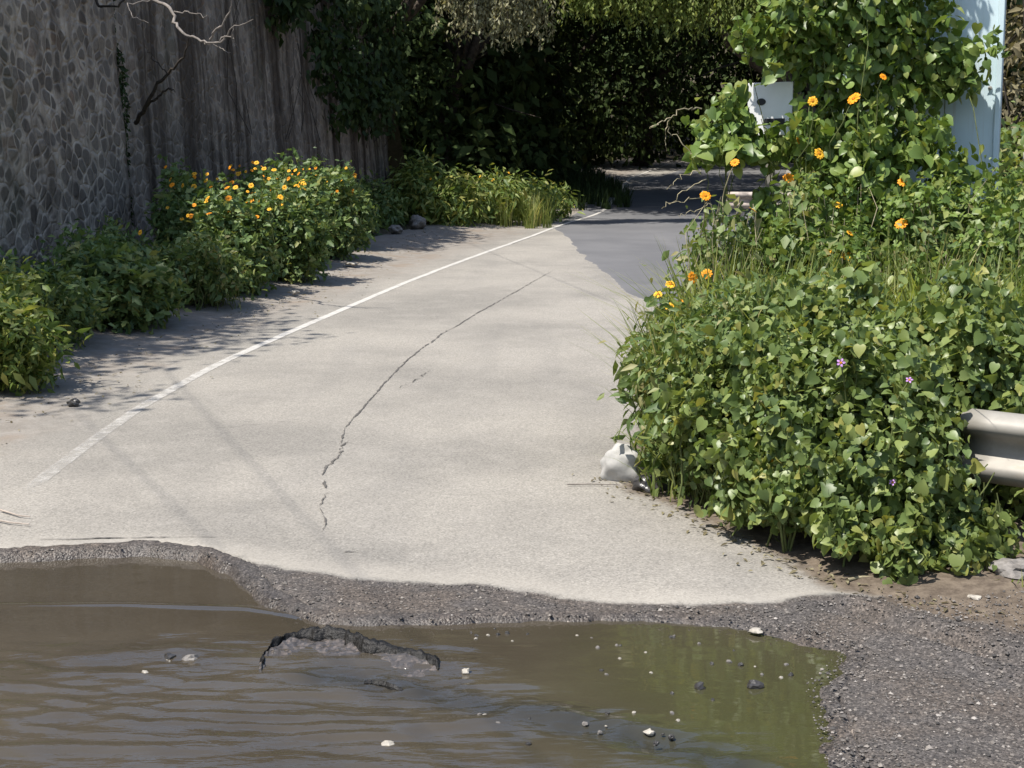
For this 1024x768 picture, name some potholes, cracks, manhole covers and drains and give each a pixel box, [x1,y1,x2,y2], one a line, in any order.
pothole [0,540,869,768]
crack [319,274,546,553]
